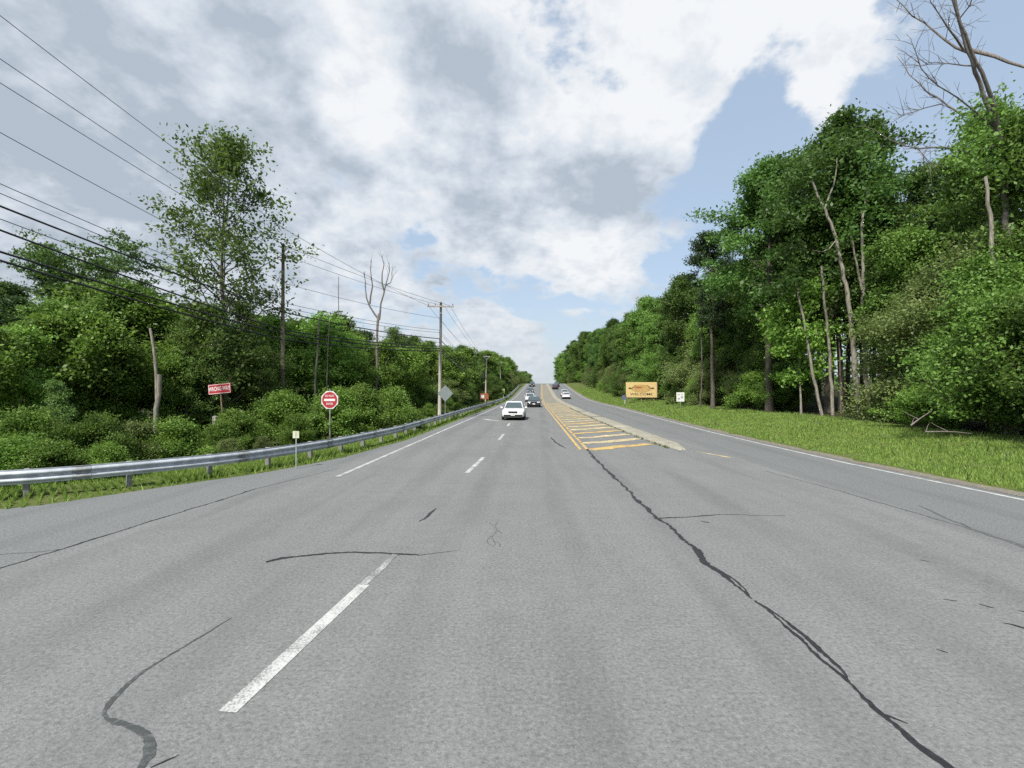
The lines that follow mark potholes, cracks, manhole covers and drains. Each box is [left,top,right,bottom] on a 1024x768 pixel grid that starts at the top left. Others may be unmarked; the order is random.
crack [0,468,337,568]
crack [265,550,455,562]
